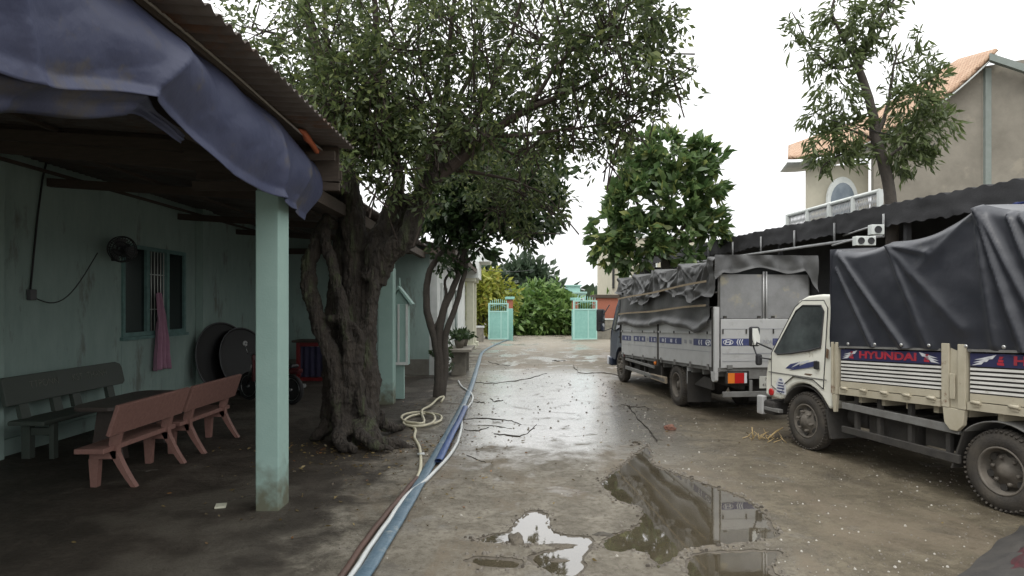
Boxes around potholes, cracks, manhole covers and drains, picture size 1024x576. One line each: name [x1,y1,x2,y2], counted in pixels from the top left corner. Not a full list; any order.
crack [621,404,657,443]
crack [463,360,618,437]
pothole [685,548,784,576]
pothole [476,509,595,576]
pothole [464,556,524,569]
pothole [599,446,780,569]
